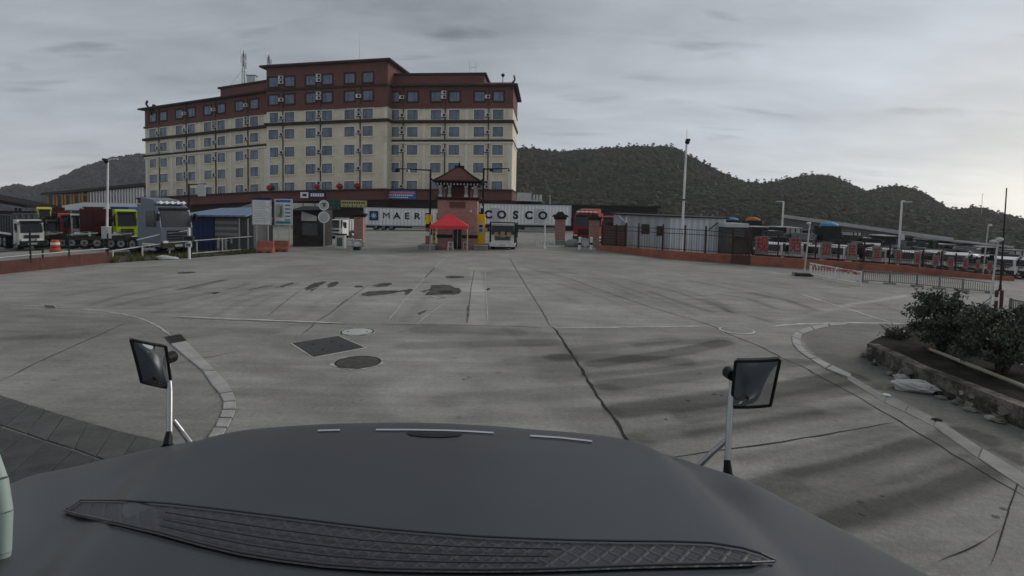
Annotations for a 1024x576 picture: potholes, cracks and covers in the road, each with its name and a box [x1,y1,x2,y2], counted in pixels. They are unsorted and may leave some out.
utility cover [290,336,367,358]
manhole cover [330,356,384,370]
crack [939,530,999,561]
crack [550,326,629,440]
manhole cover [338,328,375,336]
